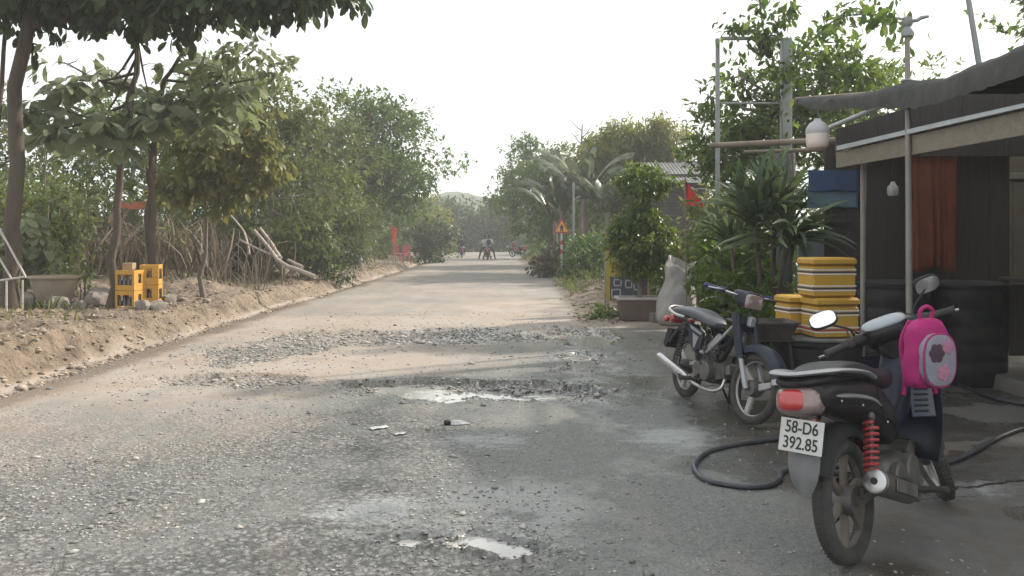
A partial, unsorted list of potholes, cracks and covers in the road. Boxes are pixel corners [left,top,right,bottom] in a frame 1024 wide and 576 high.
pothole [328,376,618,404]
pothole [552,351,608,372]
